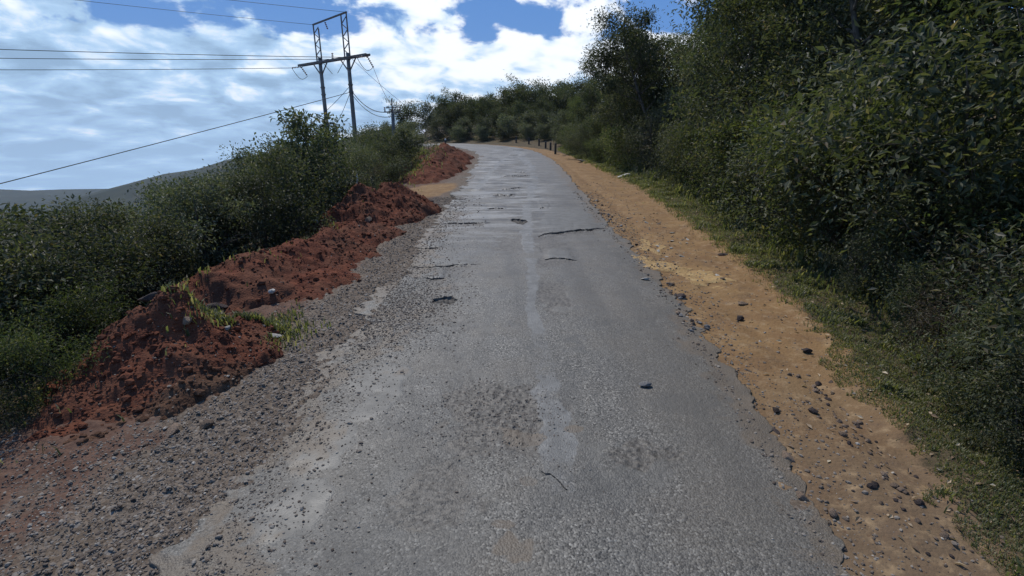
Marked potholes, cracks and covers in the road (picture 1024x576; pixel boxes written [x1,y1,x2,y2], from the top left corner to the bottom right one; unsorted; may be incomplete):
pothole [431,296,457,304]
crack [414,247,476,280]
crack [443,175,530,224]
